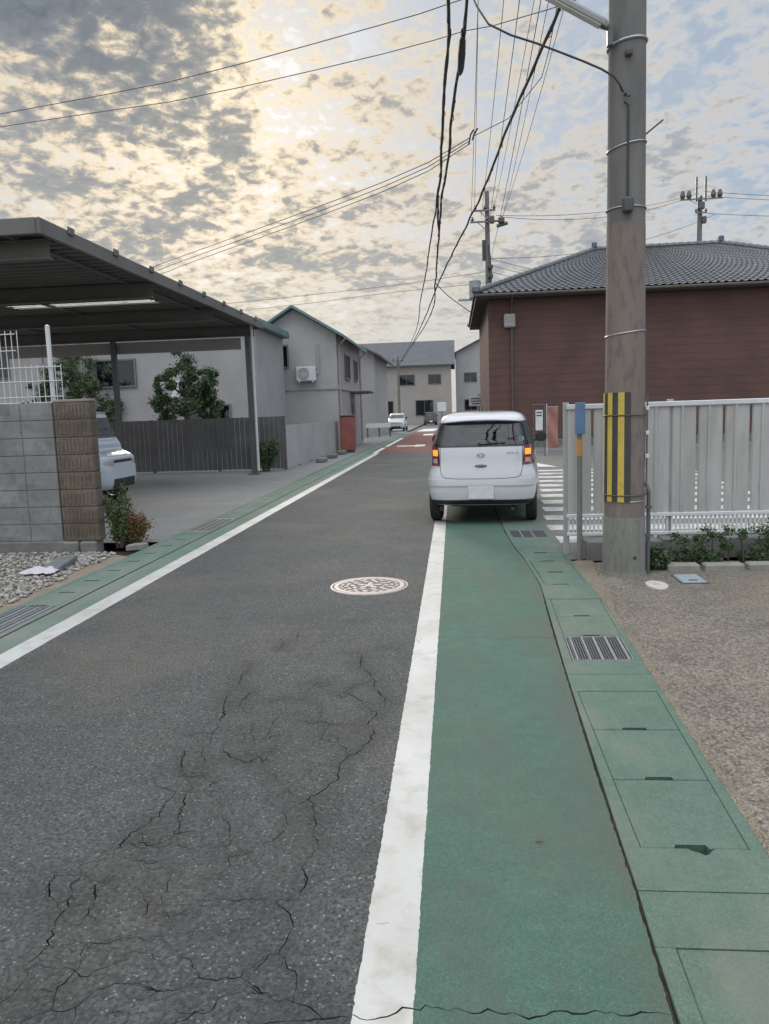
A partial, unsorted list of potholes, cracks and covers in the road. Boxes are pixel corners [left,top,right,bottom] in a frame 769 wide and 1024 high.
manhole cover [330,577,409,595]
drain grate [187,518,235,532]
drain grate [508,530,549,538]
utility cover [645,580,668,590]
drain grate [564,636,634,661]
crack [0,633,672,1024]
